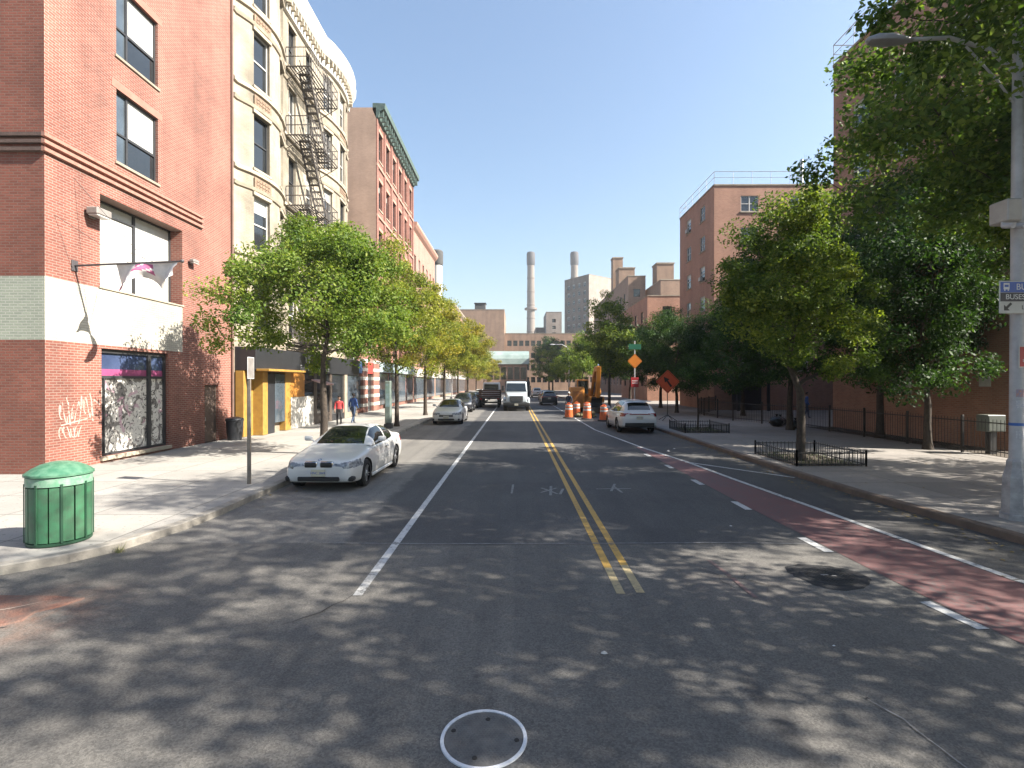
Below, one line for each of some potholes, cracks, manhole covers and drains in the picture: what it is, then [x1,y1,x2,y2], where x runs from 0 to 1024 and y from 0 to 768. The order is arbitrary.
crack [863,696,967,768]
manhole cover [440,709,527,768]
